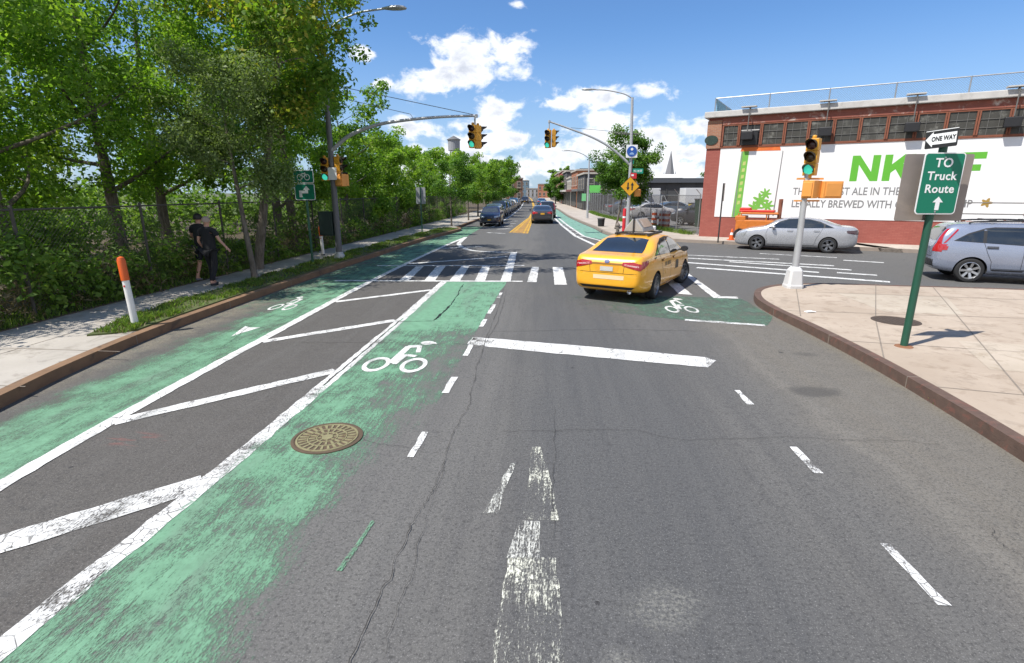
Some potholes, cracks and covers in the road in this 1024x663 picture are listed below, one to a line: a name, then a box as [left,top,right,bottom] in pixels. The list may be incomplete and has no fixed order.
crack [328,288,505,663]
manhole cover [290,423,363,455]
